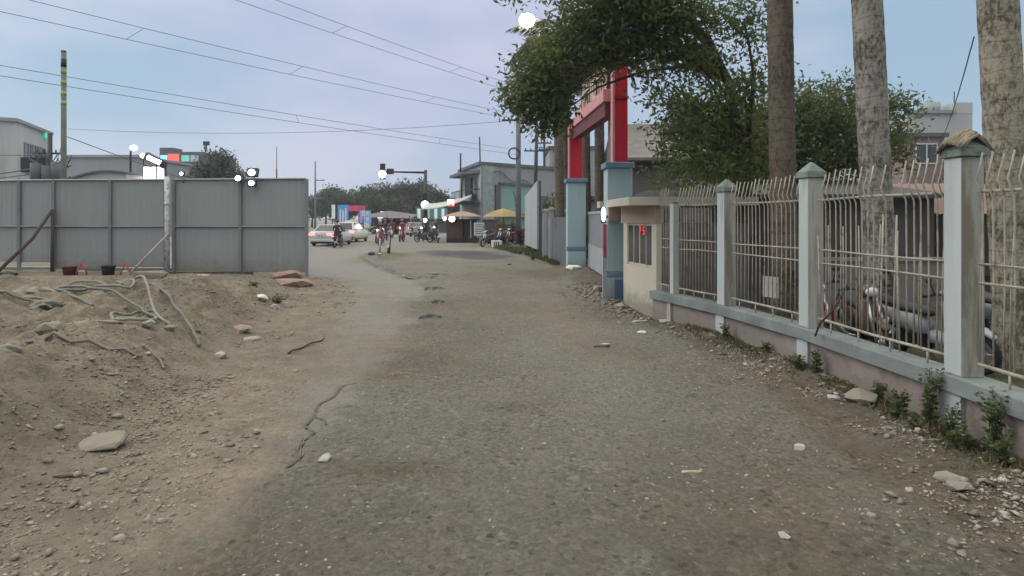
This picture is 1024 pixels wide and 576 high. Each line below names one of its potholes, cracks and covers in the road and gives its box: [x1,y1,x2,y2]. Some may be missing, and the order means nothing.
crack [286,383,357,469]
